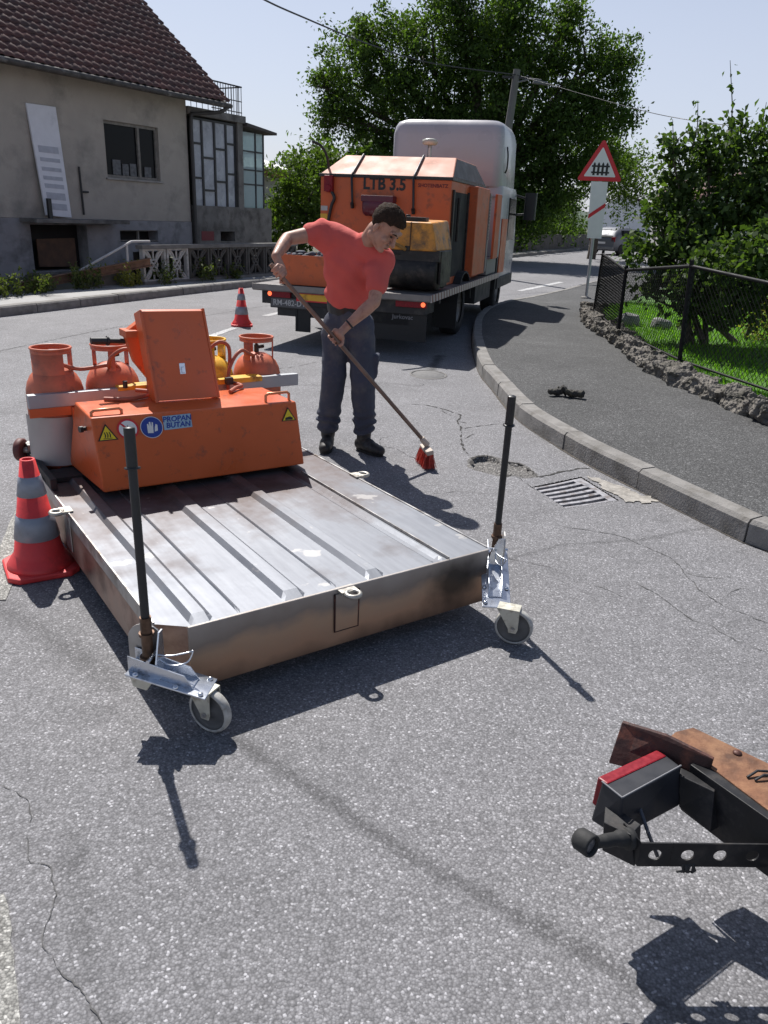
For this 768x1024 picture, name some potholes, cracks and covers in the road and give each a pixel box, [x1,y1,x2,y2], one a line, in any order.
drain grate [534,477,619,508]
pothole [467,455,538,478]
crack [1,785,103,1024]
manhole cover [410,370,447,379]
crack [565,526,766,651]
crack [417,404,492,453]
